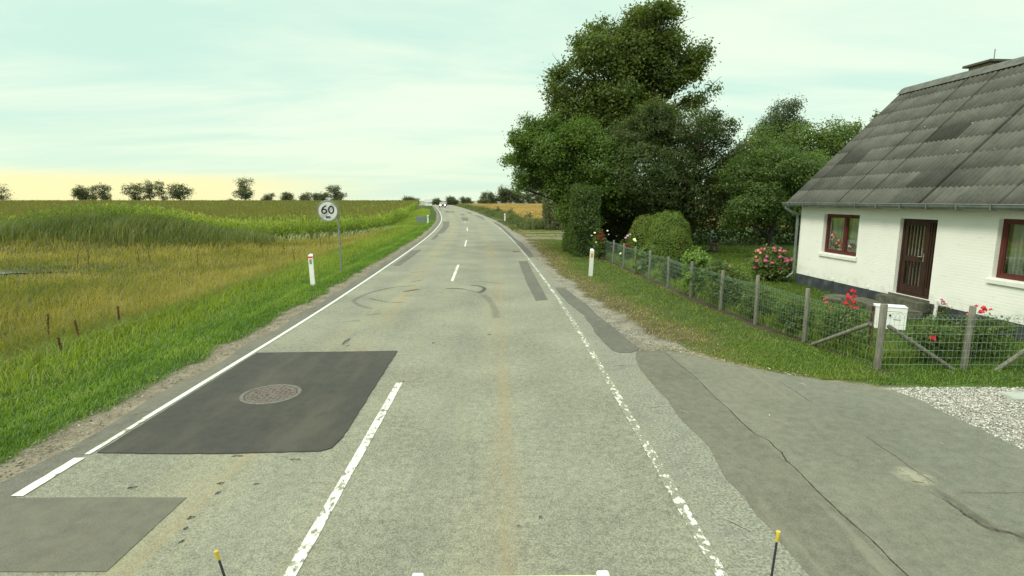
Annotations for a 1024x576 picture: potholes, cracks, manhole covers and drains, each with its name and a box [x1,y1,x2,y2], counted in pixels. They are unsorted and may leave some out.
manhole cover [239,384,302,404]
crack [669,356,1024,576]
